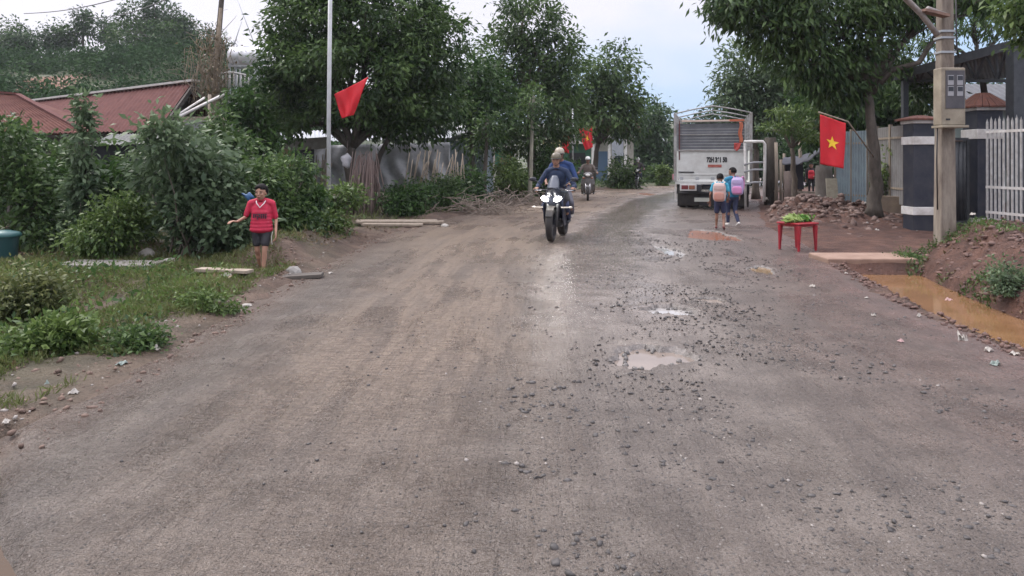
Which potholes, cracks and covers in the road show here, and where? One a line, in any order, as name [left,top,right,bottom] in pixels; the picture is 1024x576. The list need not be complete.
pothole [675,228,755,244]
pothole [583,337,732,381]
pothole [640,240,702,262]
